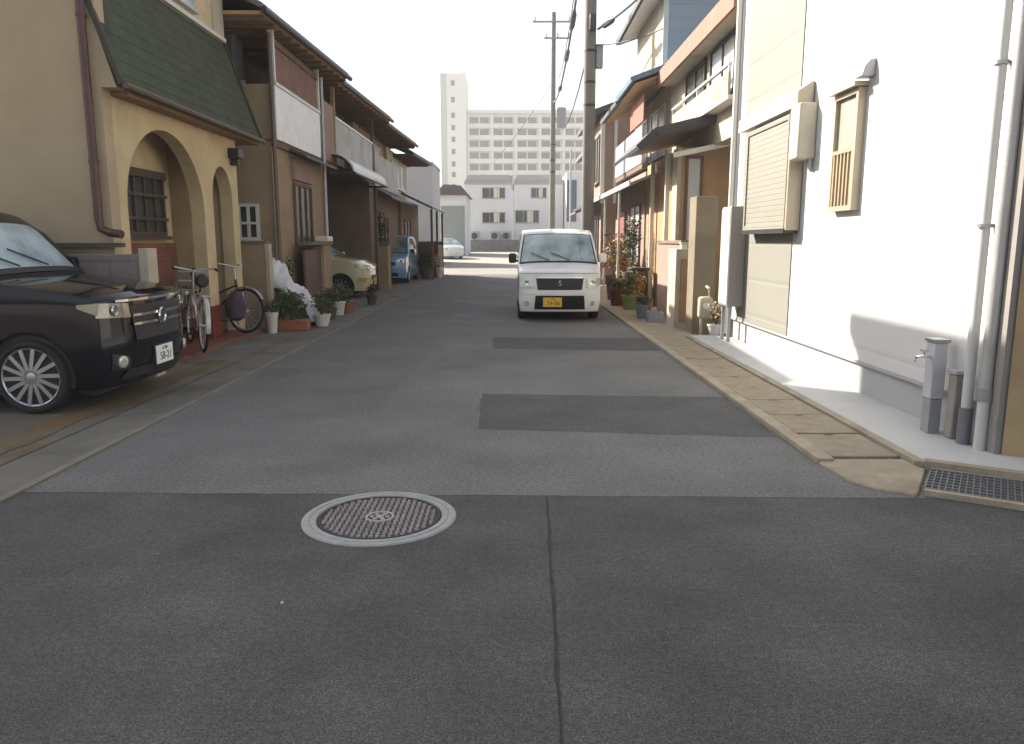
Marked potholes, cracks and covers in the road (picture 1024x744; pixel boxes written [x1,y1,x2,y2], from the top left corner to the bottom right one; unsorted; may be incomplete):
manhole cover [301,492,456,547]
drain grate [924,467,1024,511]
